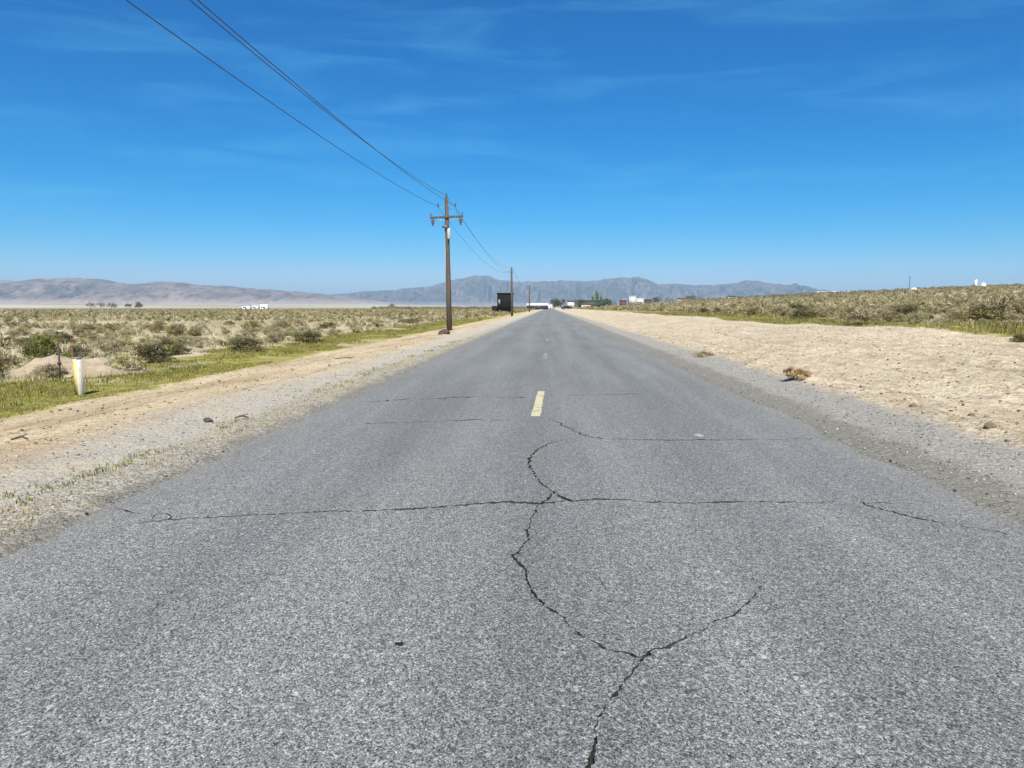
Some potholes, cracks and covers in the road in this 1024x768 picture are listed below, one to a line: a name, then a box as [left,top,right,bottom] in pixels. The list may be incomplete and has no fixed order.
crack [862,502,1007,535]
crack [113,418,835,768]
